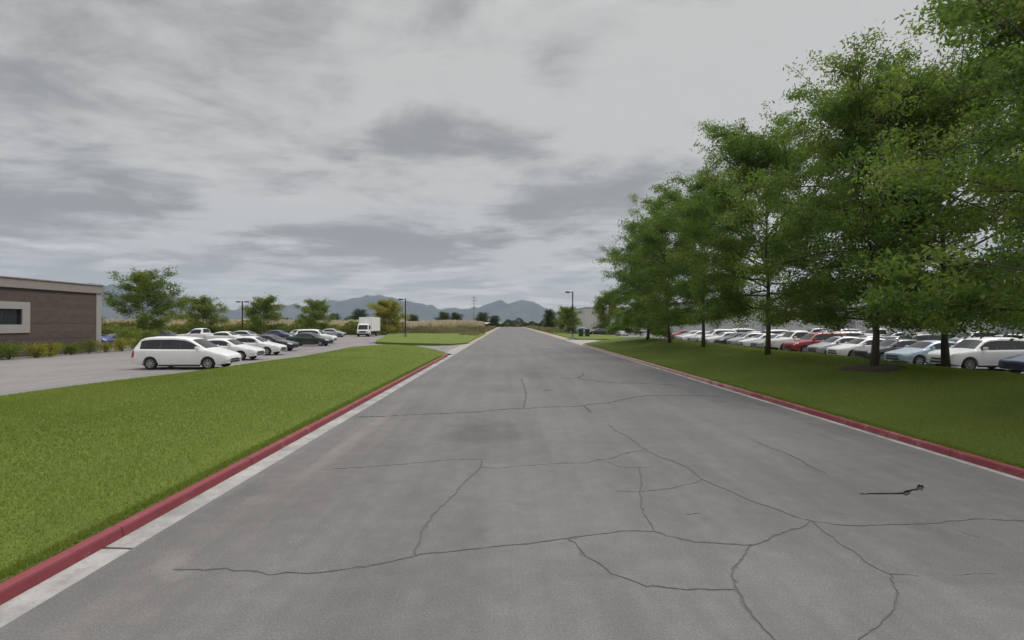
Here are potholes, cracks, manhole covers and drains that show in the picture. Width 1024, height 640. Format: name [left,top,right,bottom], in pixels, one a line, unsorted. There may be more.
crack [365,373,721,417]
crack [173,425,1024,640]
